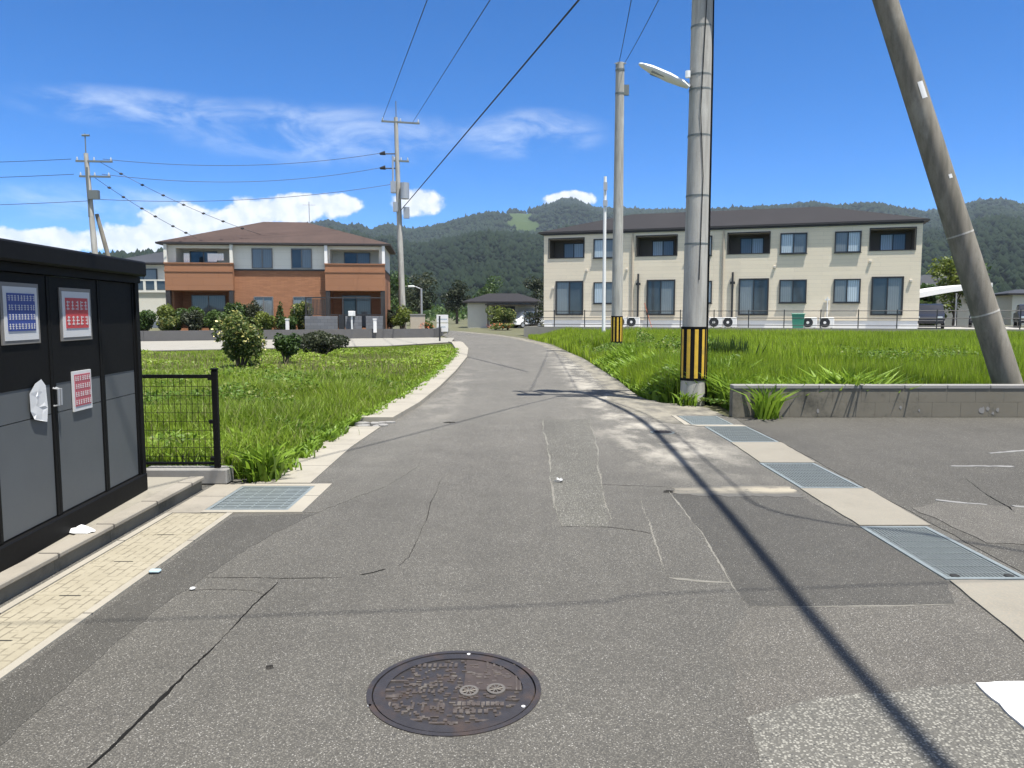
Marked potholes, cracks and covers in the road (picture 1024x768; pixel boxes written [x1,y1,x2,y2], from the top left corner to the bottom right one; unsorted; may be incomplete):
crack [87,577,342,768]
drain grate [678,416,734,425]
drain grate [200,483,332,513]
drain grate [704,426,778,442]
drain grate [759,463,863,488]
manhole cover [366,651,541,737]
drain grate [860,526,1024,606]
